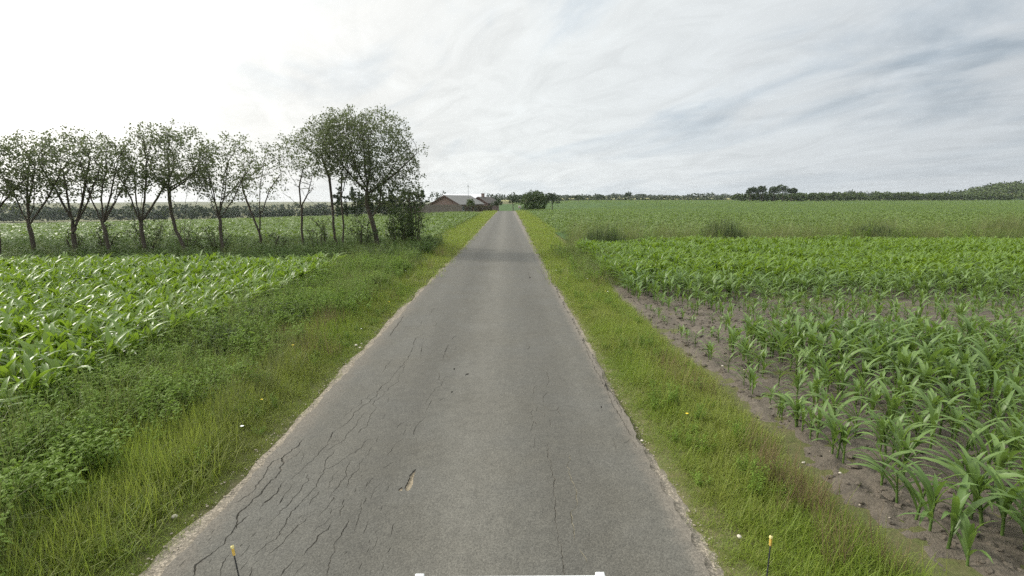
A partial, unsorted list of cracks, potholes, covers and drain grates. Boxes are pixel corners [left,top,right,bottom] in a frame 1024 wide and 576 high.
crack [530,375,587,575]
pothole [405,469,416,491]
crack [193,311,454,576]
